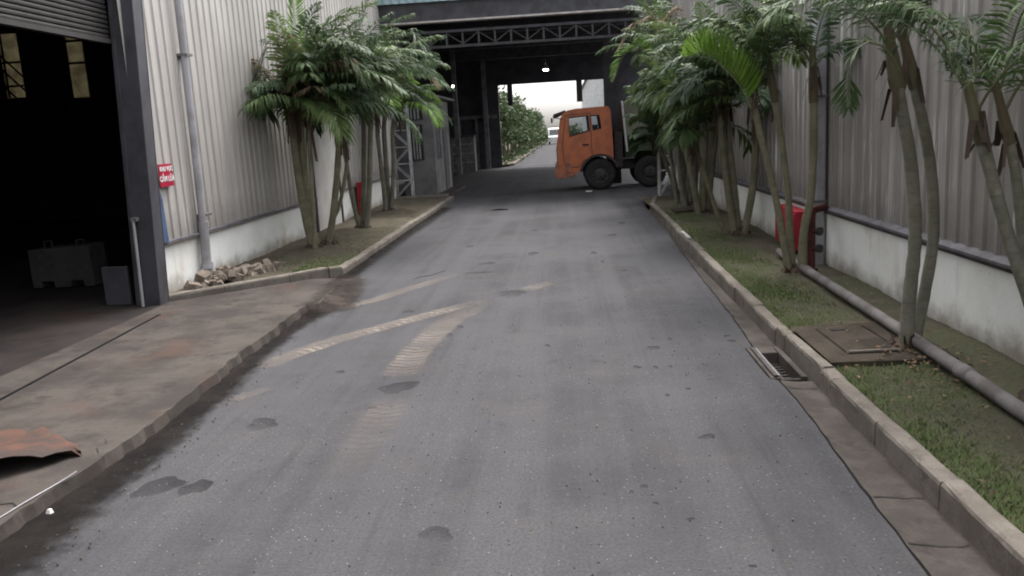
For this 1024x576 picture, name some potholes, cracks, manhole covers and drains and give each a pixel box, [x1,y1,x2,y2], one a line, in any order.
drain grate [746,346,808,382]
pothole [178,479,213,496]
pothole [418,526,454,543]
manhole cover [816,325,902,354]
pothole [130,476,188,498]
pothole [377,381,420,394]
